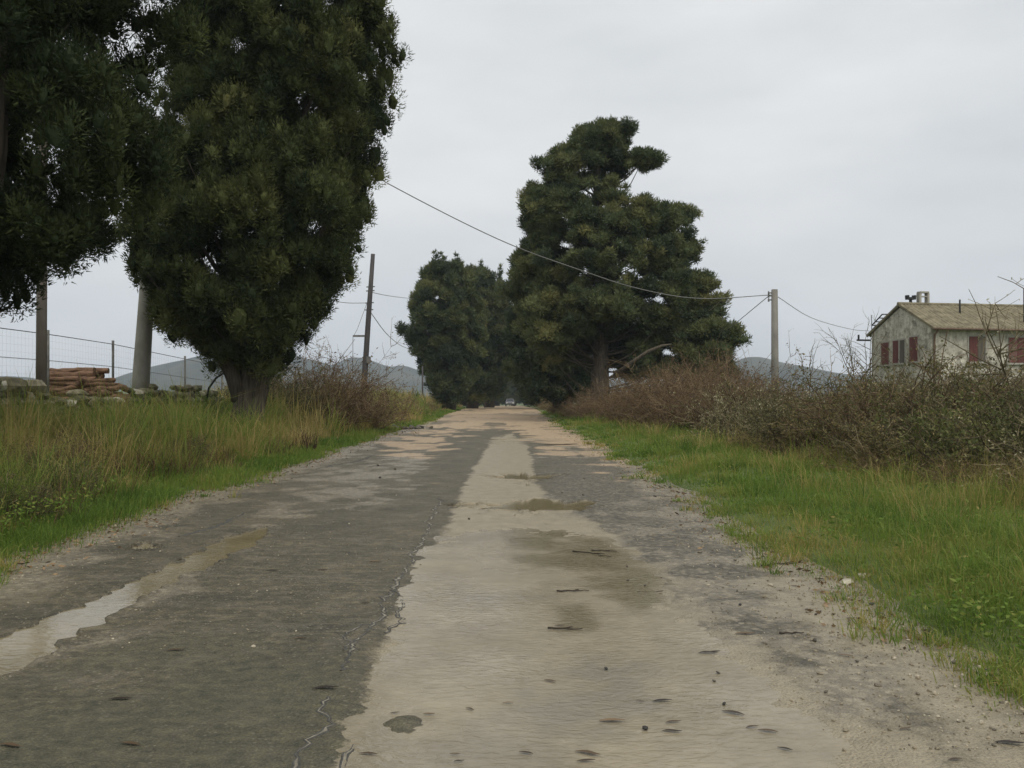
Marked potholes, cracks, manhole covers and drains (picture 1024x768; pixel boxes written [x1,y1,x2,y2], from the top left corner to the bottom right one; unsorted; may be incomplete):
crack [291,696,355,768]
crack [341,498,444,671]
